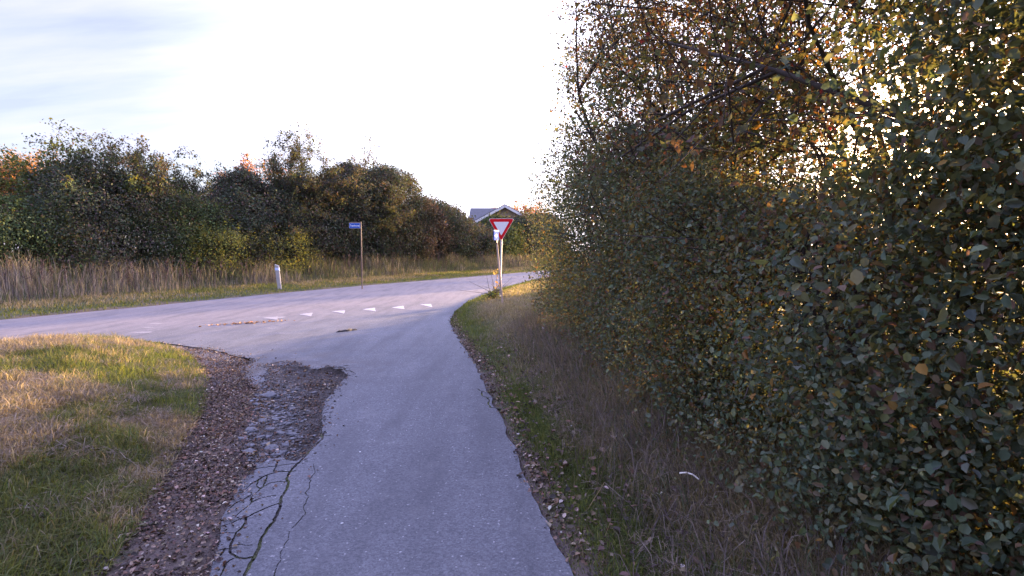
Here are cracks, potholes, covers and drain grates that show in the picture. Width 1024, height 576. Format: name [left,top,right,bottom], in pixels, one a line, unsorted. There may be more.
pothole [246,362,349,464]
crack [206,433,325,576]
